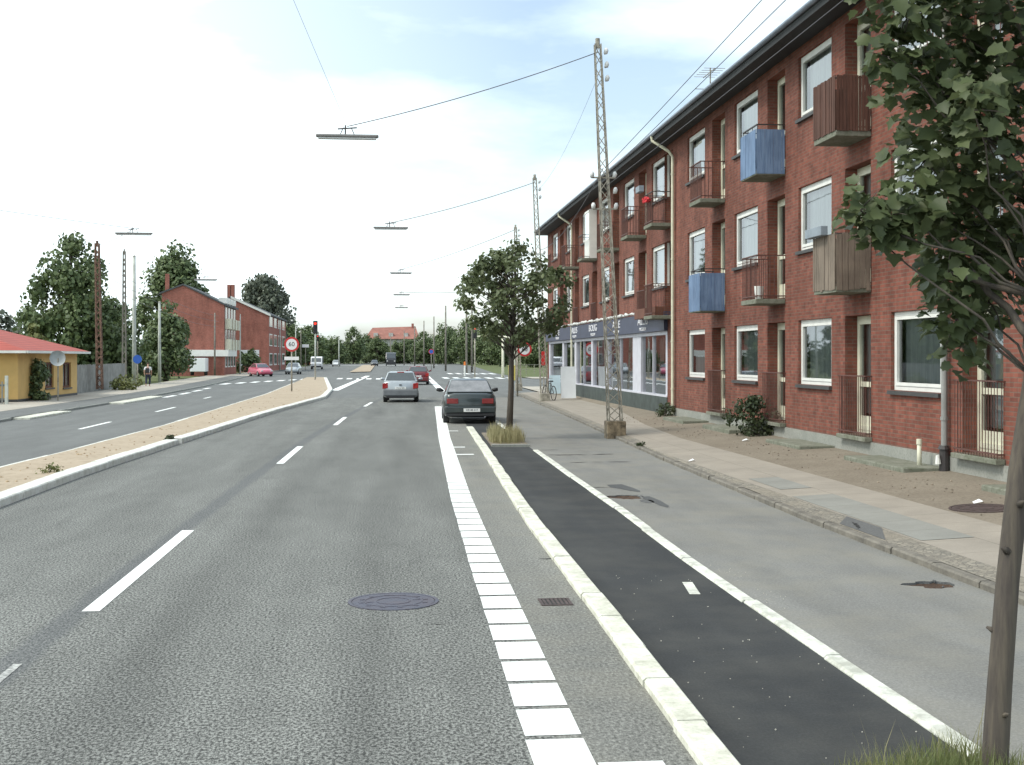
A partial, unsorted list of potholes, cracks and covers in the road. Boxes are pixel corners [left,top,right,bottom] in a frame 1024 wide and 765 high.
manhole cover [348,592,439,611]
drain grate [538,598,573,606]
pothole [900,580,955,589]
manhole cover [948,503,1004,513]
